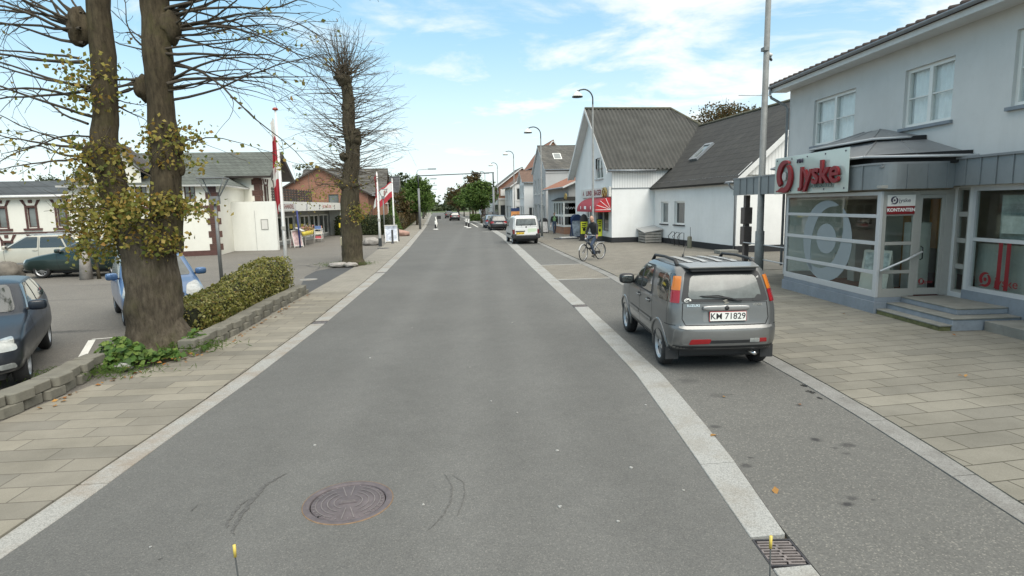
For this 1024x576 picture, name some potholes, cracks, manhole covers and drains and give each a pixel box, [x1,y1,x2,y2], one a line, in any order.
drain grate [752,539,812,569]
crack [429,474,465,529]
manhole cover [302,481,393,525]
crack [225,473,287,535]
